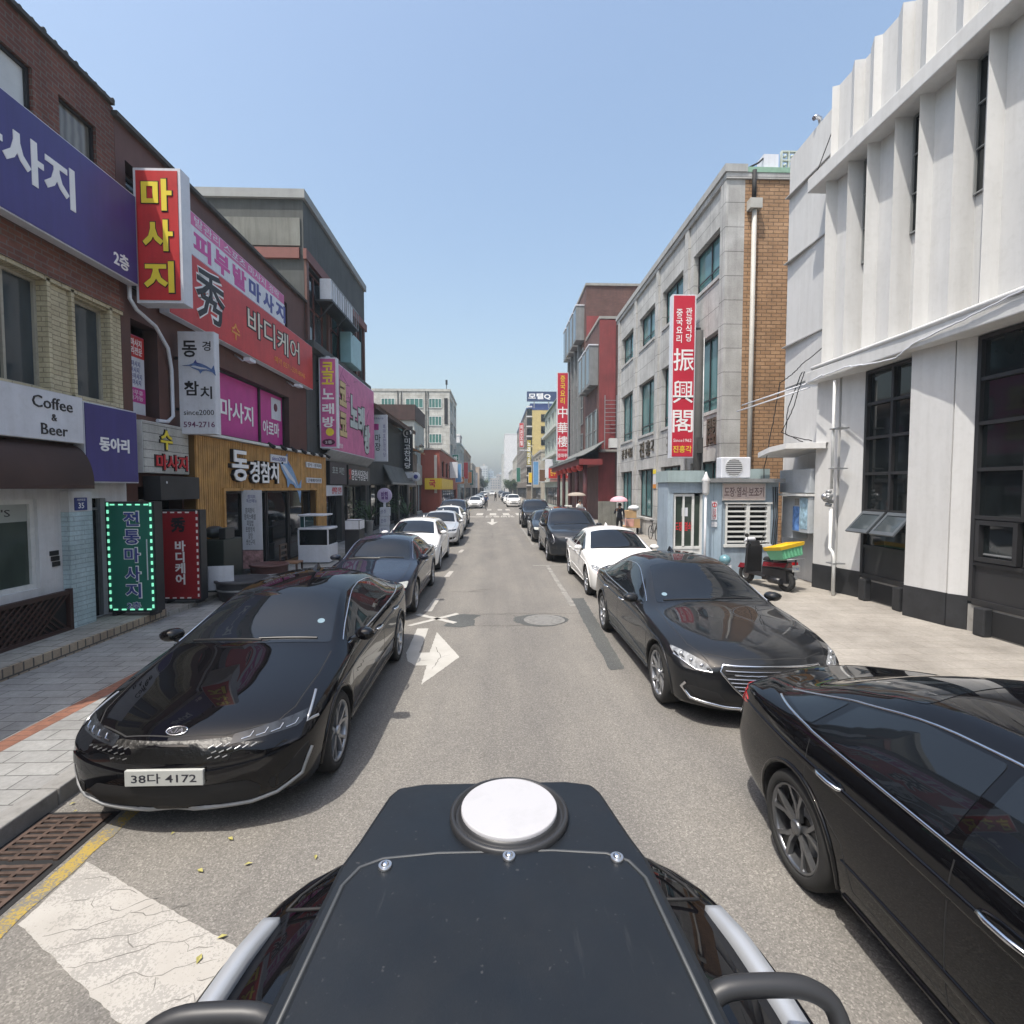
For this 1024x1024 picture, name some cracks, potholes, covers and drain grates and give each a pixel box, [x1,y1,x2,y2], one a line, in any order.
manhole cover [514,614,569,626]
drain grate [0,811,121,916]
